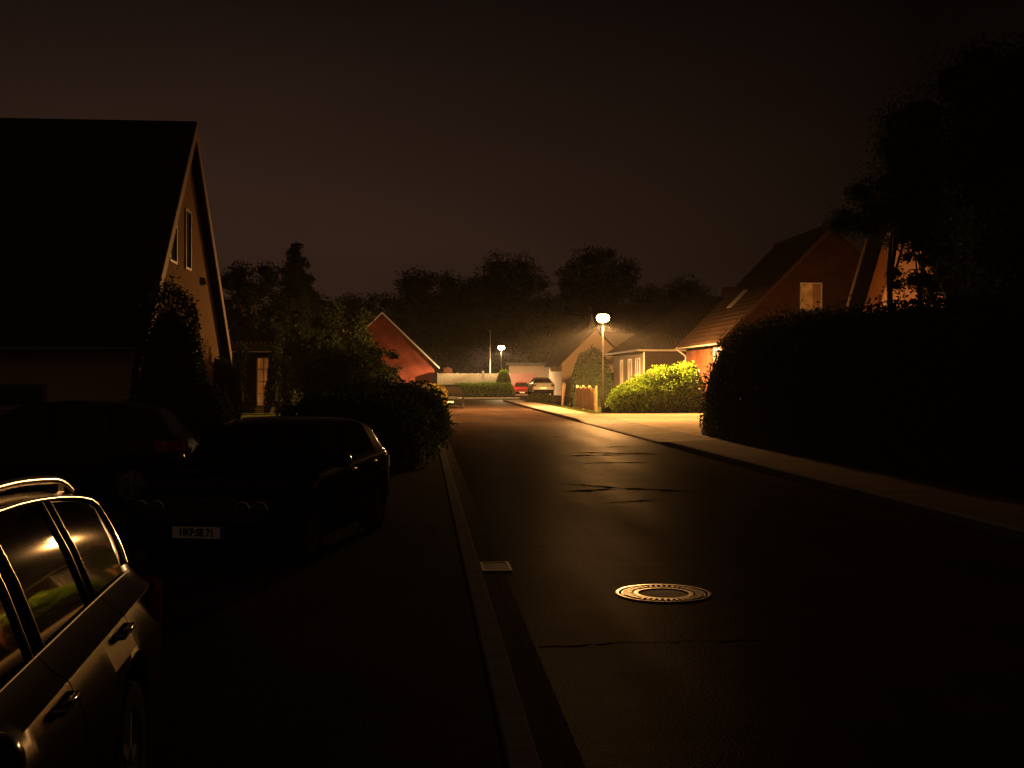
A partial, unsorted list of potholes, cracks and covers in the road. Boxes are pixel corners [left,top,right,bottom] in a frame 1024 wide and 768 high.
crack [559,483,696,504]
manhole cover [615,584,712,603]
crack [536,639,774,648]
